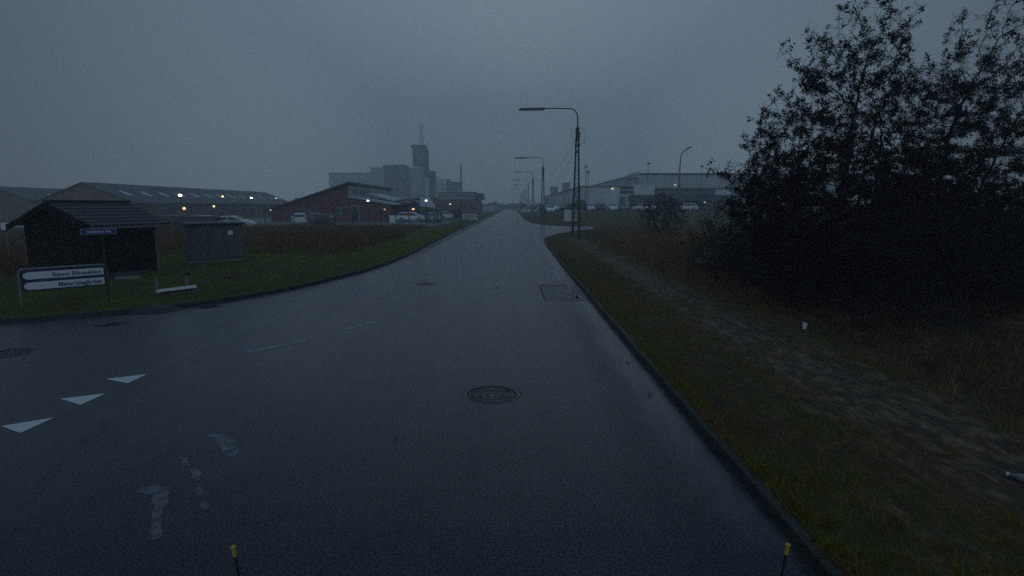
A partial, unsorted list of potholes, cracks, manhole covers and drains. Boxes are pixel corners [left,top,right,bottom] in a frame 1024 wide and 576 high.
manhole cover [462,385,522,405]
manhole cover [0,348,37,358]
